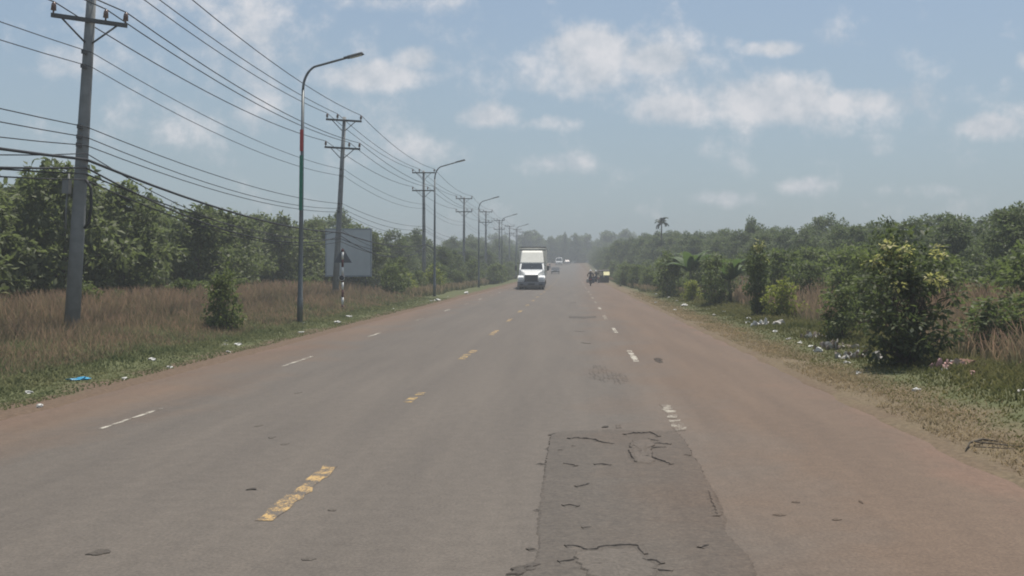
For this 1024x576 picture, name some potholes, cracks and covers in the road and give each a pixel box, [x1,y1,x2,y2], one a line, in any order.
crack [535,431,690,508]
crack [557,526,673,573]
